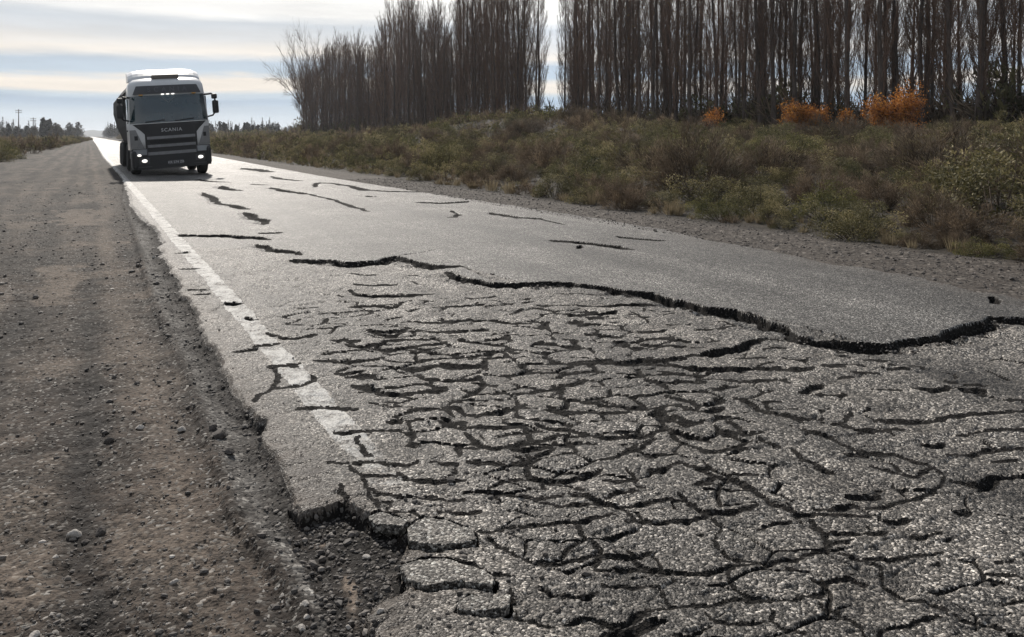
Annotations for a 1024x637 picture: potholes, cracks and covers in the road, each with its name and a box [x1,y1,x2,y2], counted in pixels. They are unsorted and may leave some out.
crack [175,168,1024,637]
pothole [287,501,407,637]
